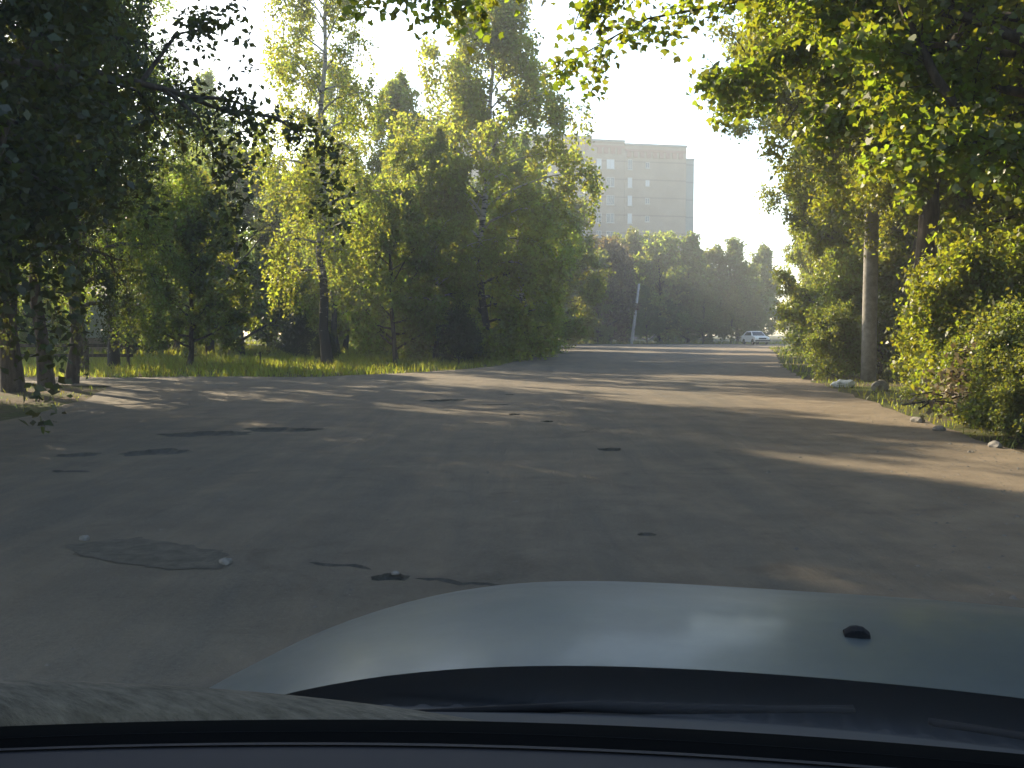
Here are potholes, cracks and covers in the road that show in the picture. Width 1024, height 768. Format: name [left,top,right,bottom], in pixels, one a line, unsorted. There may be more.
crack [309,562,371,570]
pothole [119,448,192,456]
crack [414,578,499,586]
pothole [371,573,410,581]
